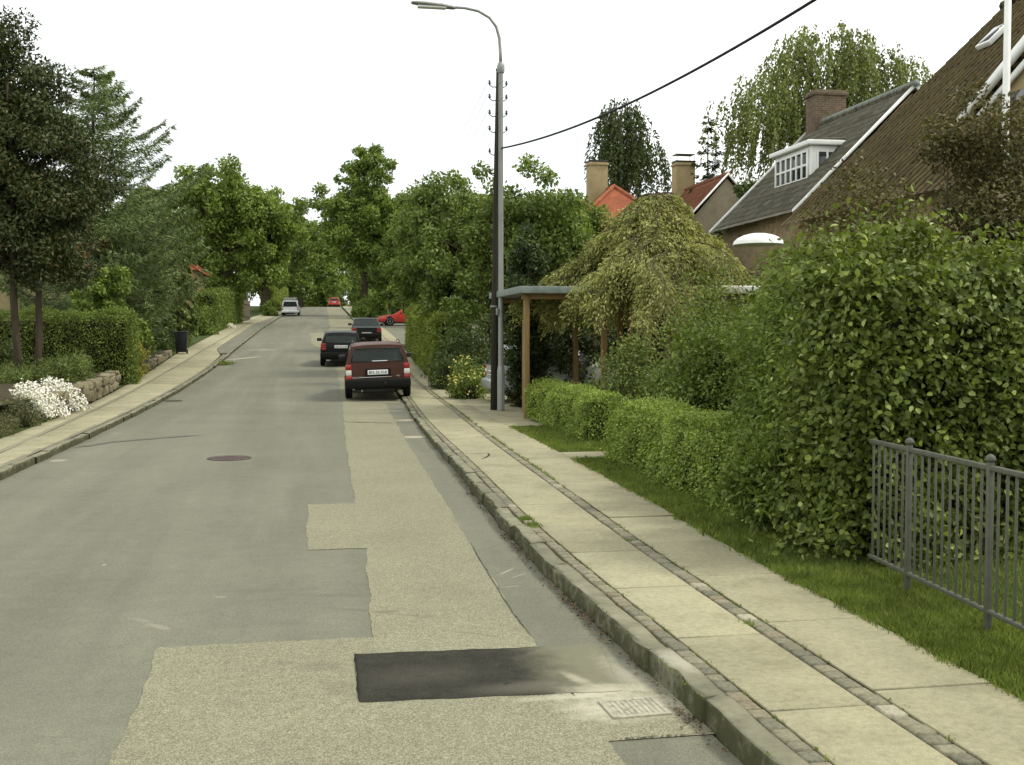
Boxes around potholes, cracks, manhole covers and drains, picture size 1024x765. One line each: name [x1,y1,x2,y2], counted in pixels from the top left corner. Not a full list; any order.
drain grate [598,696,672,720]
